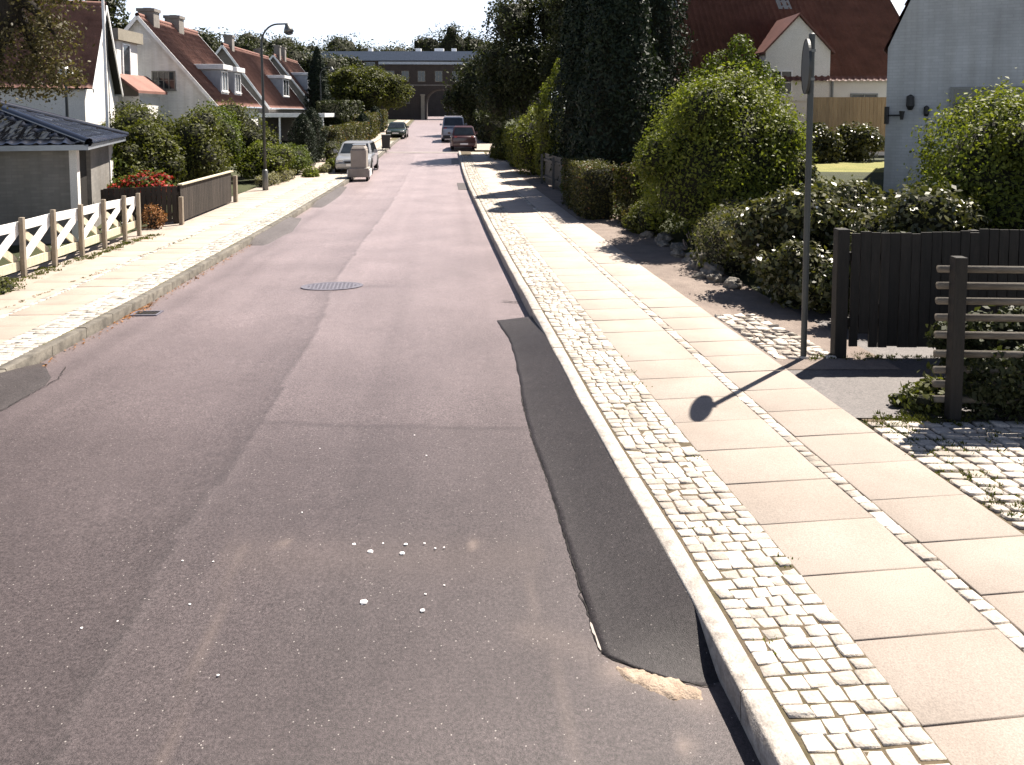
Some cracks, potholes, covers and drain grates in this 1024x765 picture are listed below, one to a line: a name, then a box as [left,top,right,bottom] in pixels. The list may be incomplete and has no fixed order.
manhole cover [301,282,363,291]
